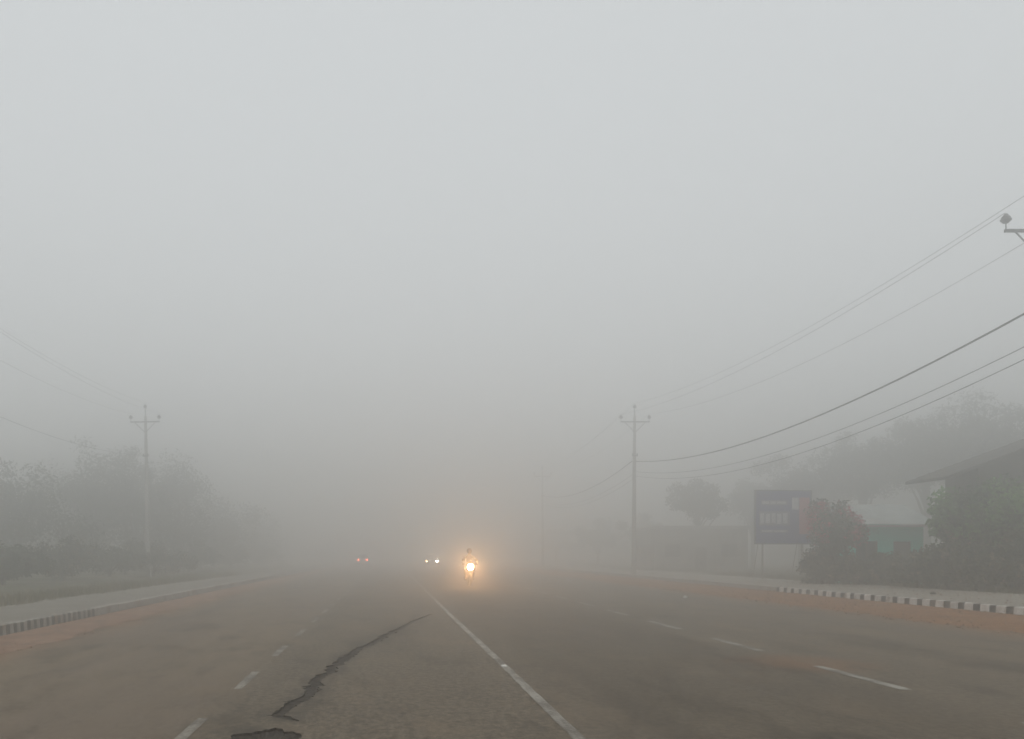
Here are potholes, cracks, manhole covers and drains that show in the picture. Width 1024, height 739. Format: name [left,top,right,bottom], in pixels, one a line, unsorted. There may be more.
crack [268,614,431,721]
pothole [231,728,302,739]
